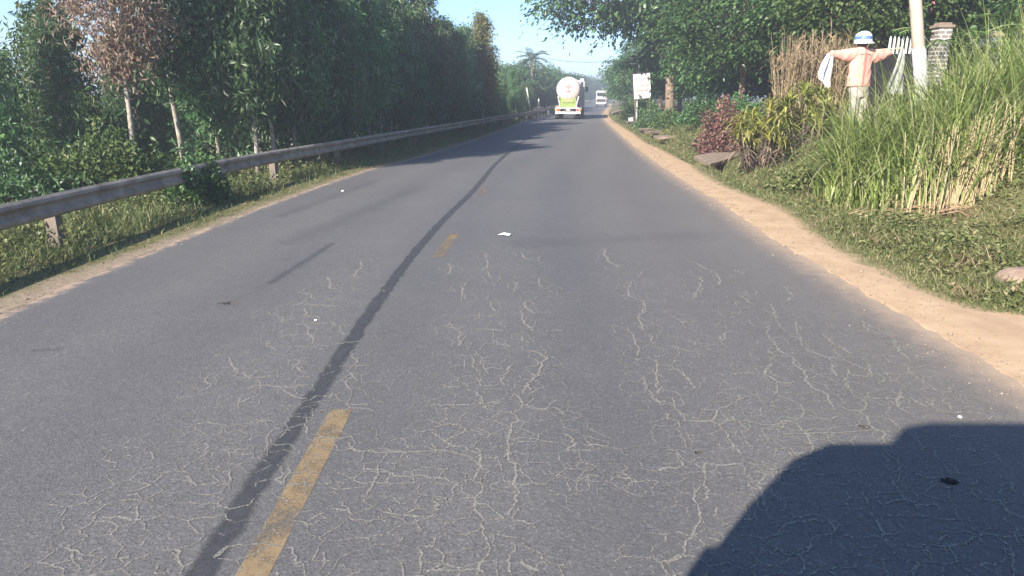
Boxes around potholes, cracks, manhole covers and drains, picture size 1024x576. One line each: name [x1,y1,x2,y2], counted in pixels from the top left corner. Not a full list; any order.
crack [18,247,653,576]
crack [542,248,1024,576]
